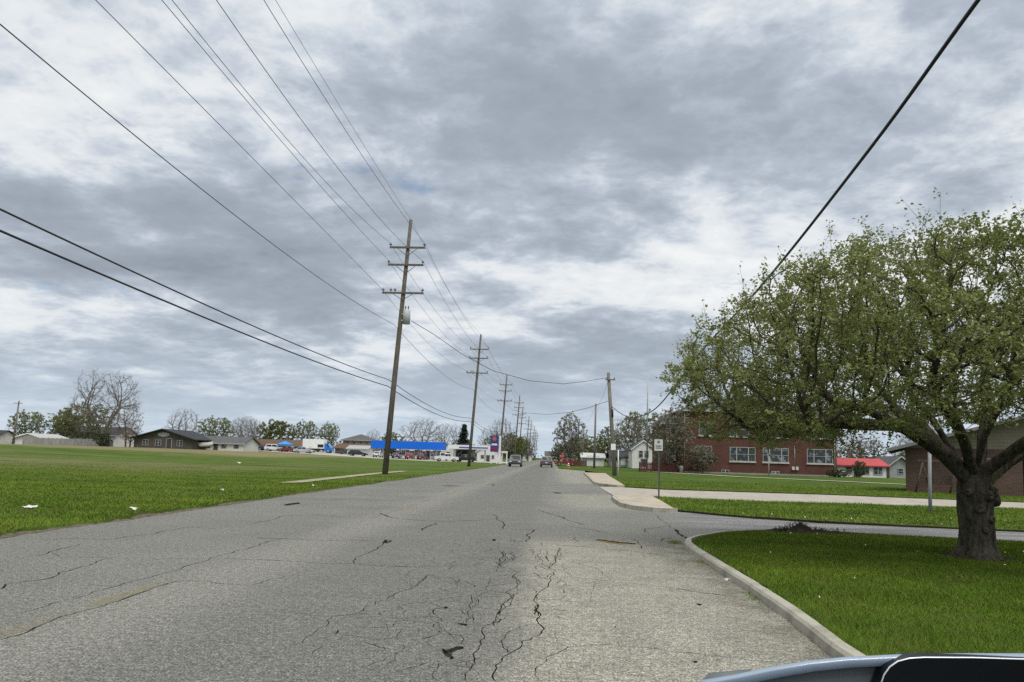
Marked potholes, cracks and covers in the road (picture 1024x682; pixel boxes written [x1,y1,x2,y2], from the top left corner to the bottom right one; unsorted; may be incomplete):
crack [1,510,604,682]
pothole [442,646,463,659]
